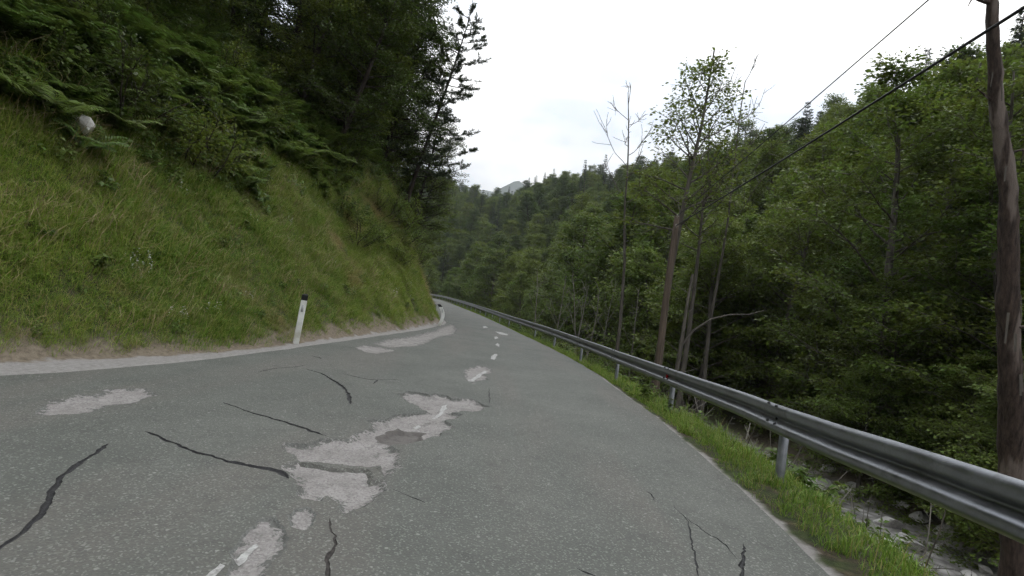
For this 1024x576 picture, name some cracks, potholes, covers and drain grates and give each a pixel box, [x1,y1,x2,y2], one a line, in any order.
crack [145,356,395,479]
crack [324,519,338,576]
crack [674,507,746,576]
crack [0,444,108,549]
